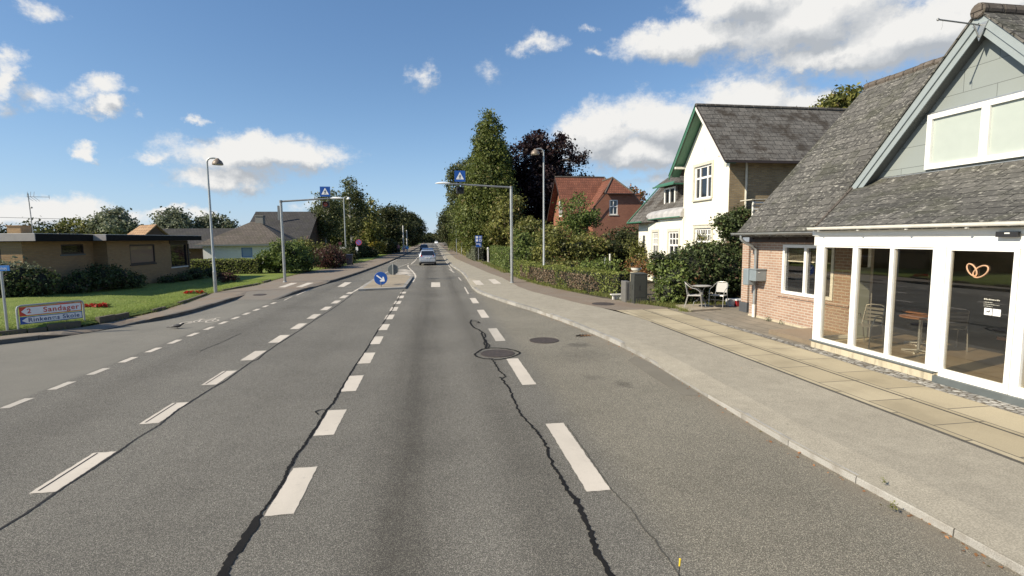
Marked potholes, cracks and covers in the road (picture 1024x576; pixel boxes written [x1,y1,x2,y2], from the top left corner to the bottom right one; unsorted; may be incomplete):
manhole cover [481,349,515,358]
